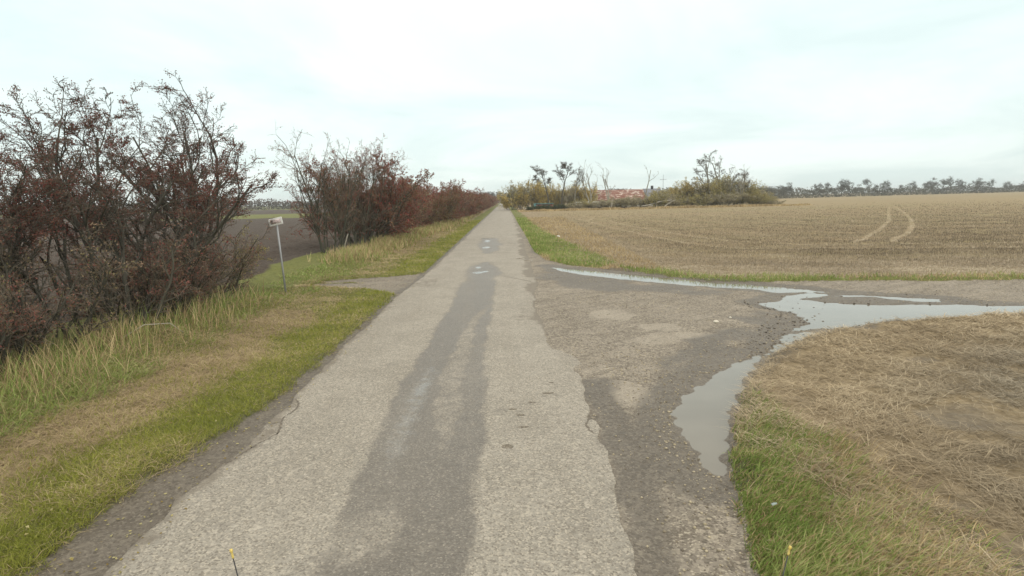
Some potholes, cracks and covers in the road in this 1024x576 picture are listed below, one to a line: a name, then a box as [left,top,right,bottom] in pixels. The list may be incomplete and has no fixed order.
crack [228,399,299,463]
pothole [497,442,518,451]
